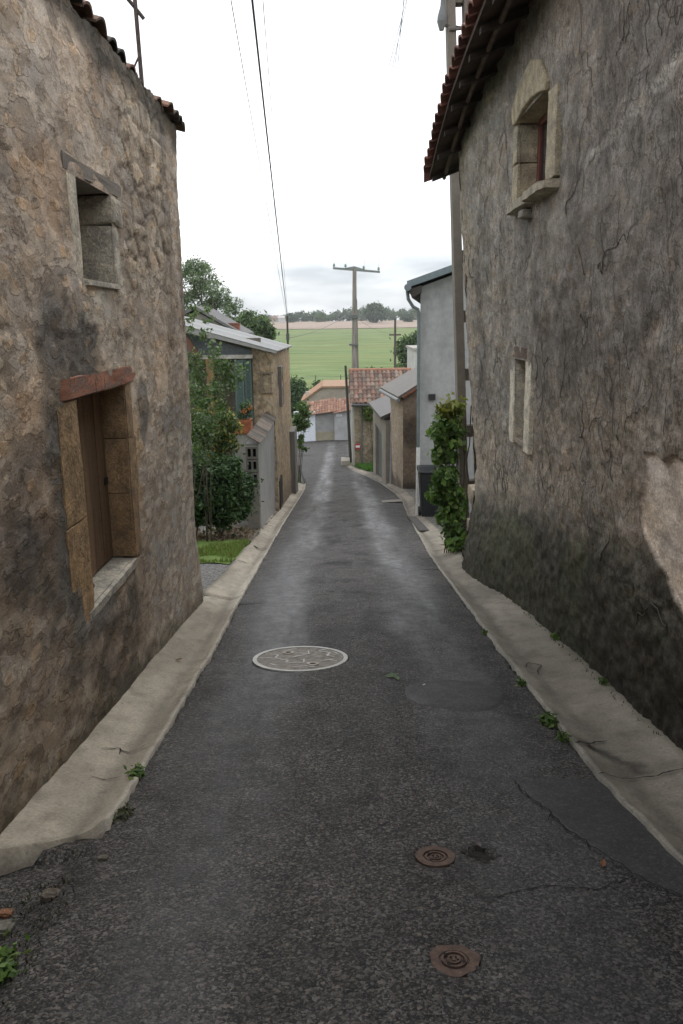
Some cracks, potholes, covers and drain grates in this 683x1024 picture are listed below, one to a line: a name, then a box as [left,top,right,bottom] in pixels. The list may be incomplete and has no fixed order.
pothole [462,845,502,864]
utility cover [415,846,455,868]
crack [496,777,683,897]
manhole cover [253,646,348,672]
utility cover [430,945,481,978]
